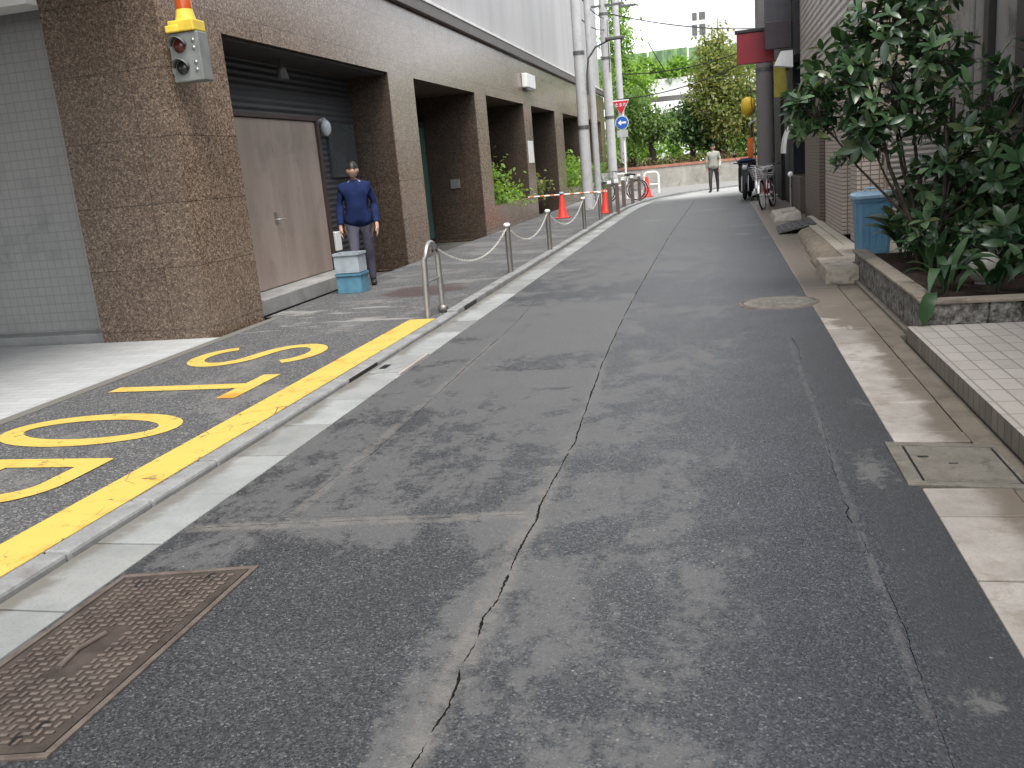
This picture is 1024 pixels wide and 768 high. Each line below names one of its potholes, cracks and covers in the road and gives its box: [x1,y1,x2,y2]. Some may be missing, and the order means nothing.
crack [204,201,694,768]
manhole cover [0,565,259,762]
manhole cover [738,296,820,310]
